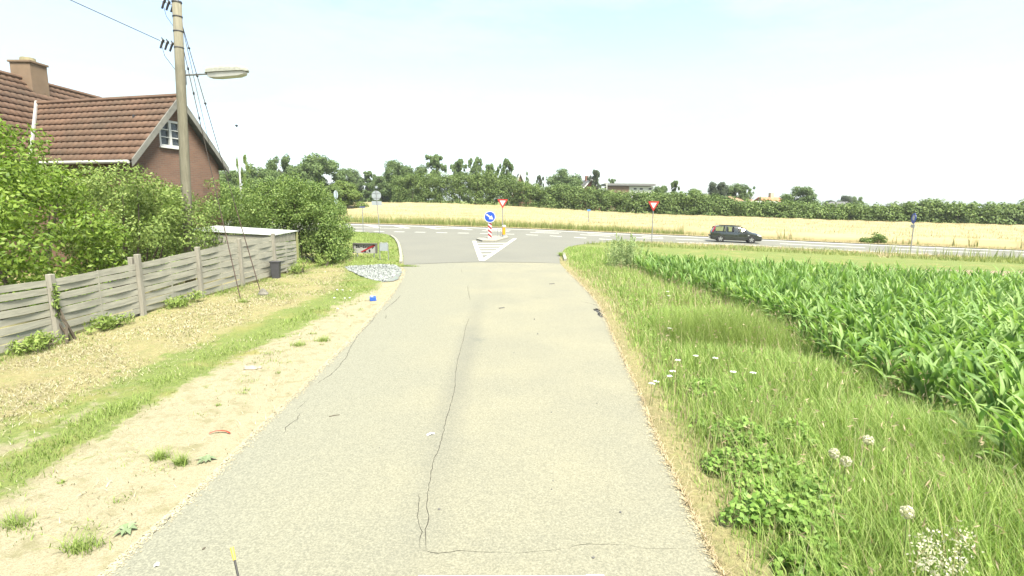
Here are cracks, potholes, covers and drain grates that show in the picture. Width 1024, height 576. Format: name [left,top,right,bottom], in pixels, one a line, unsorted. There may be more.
crack [417,319,691,554]
